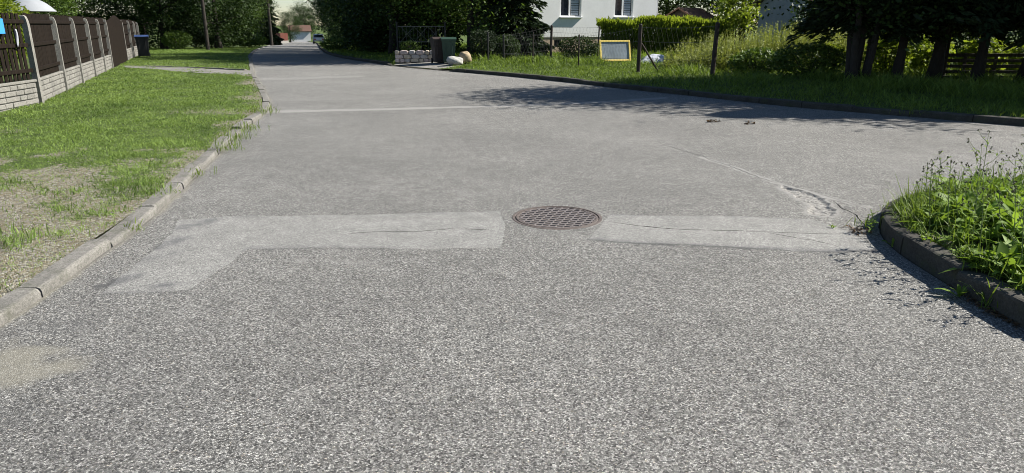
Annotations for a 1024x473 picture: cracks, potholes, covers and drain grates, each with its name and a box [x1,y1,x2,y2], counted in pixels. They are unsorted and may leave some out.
manhole cover [512,206,602,230]
crack [665,145,869,233]
crack [613,222,835,246]
